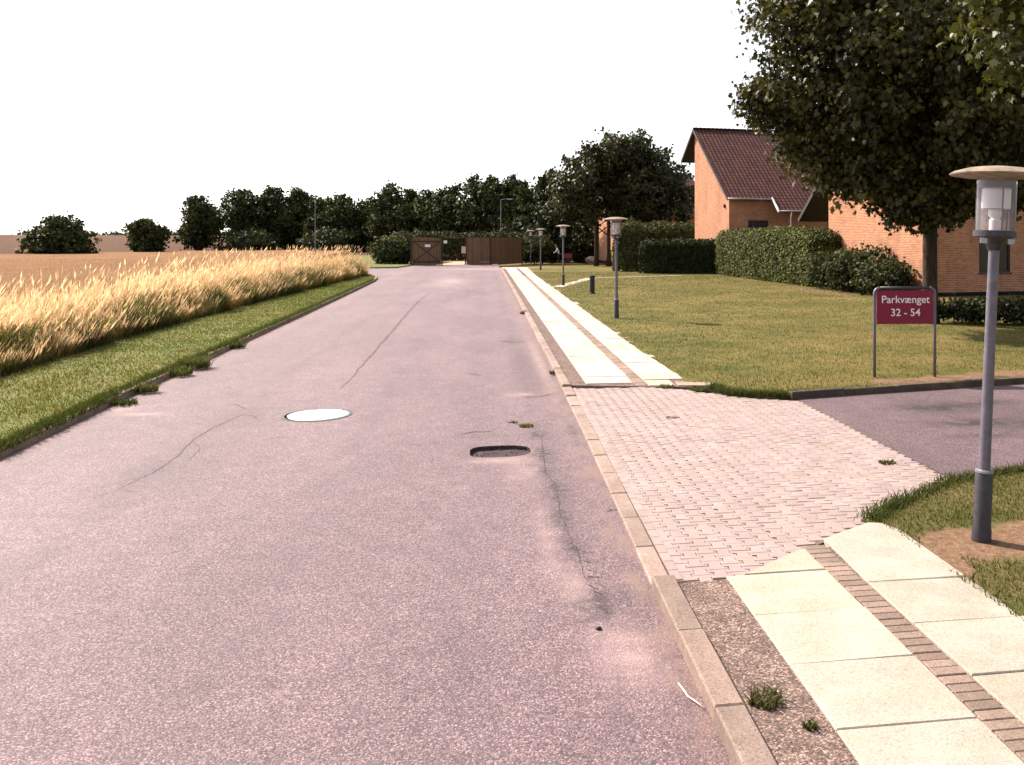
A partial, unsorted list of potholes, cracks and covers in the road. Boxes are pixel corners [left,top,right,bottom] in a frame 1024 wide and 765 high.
pothole [470,445,531,458]
manhole cover [282,408,352,422]
crack [340,293,430,388]
crack [461,421,612,614]
crack [95,404,288,497]
